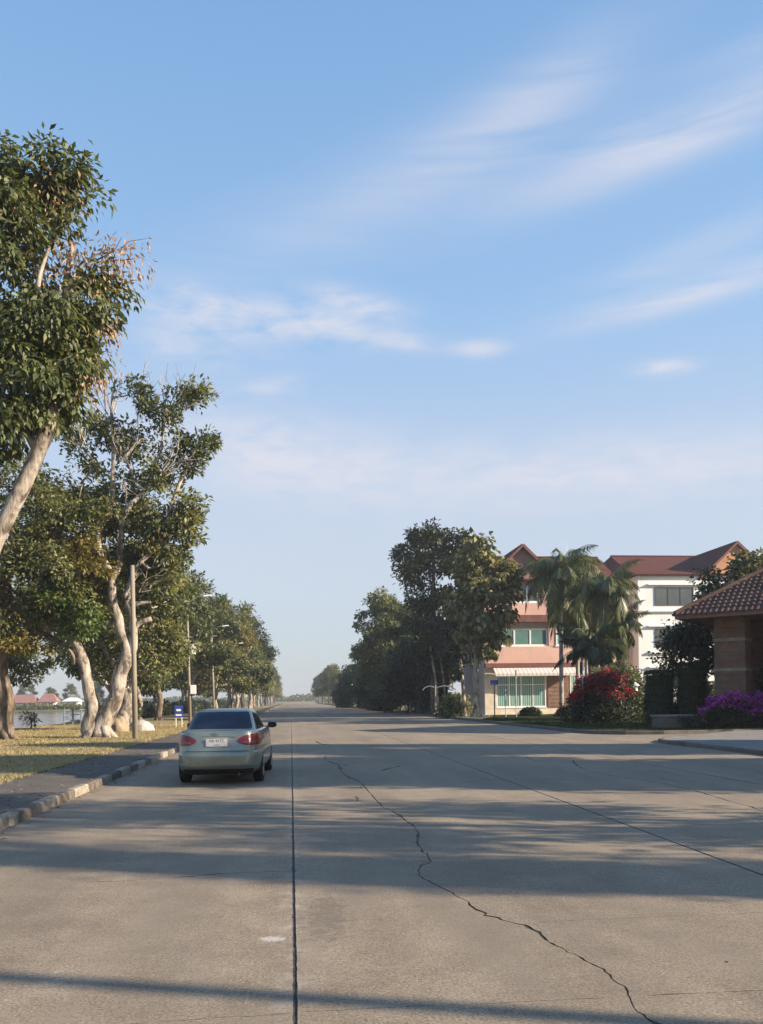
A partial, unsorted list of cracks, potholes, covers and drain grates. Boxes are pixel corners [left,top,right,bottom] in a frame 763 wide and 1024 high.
crack [136,741,761,1024]
